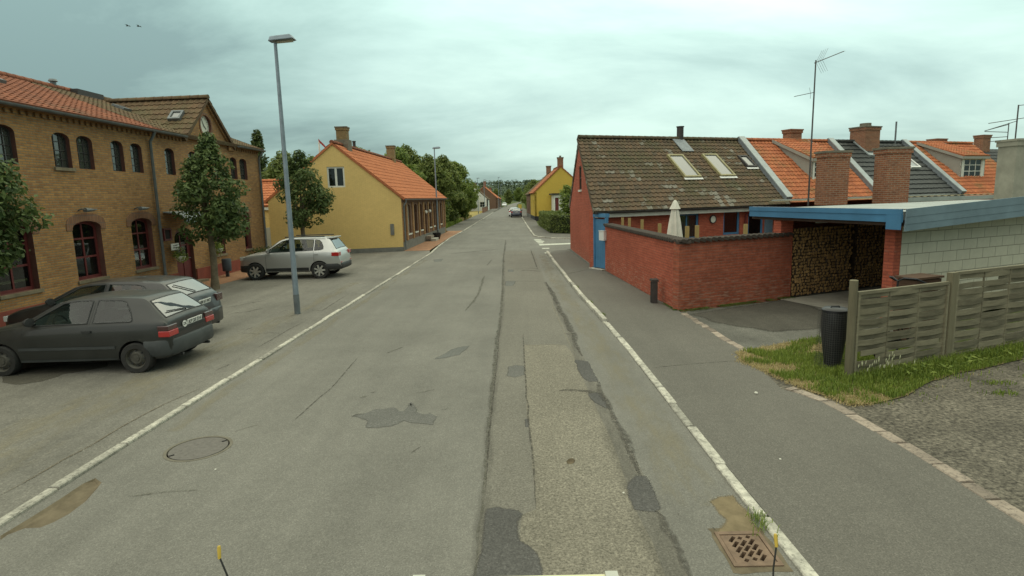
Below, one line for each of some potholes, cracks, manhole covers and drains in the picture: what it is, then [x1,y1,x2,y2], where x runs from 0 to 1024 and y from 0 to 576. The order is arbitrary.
manhole cover [163,436,233,462]
drain grate [714,531,784,567]
